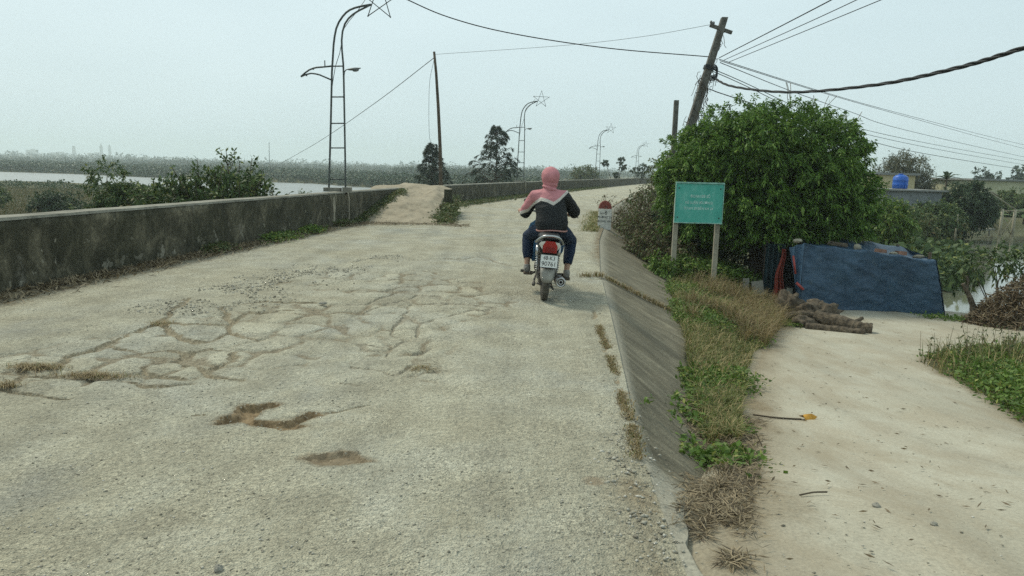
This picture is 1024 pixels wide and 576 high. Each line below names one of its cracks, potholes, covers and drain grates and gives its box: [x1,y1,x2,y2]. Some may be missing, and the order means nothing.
pothole [214,402,323,431]
crack [0,298,318,400]
crack [322,281,499,386]
pothole [300,451,372,466]
